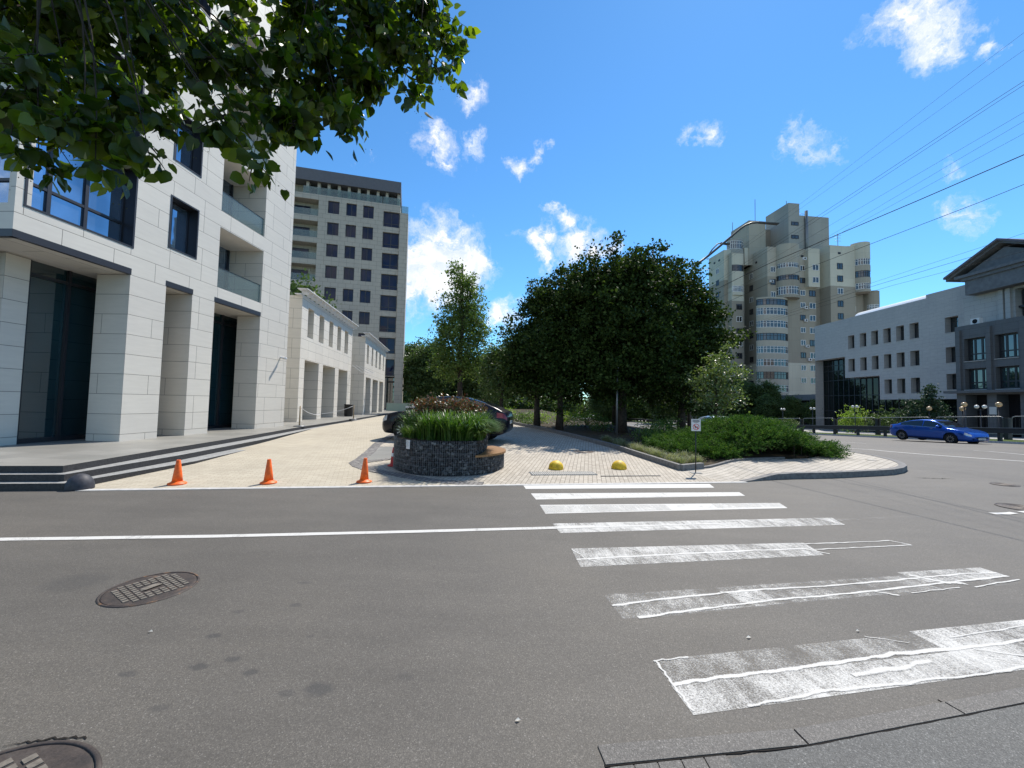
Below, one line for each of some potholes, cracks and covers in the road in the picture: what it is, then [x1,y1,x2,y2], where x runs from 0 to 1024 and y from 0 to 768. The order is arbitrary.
manhole cover [0,740,102,768]
manhole cover [95,571,200,608]
manhole cover [994,503,1024,511]
